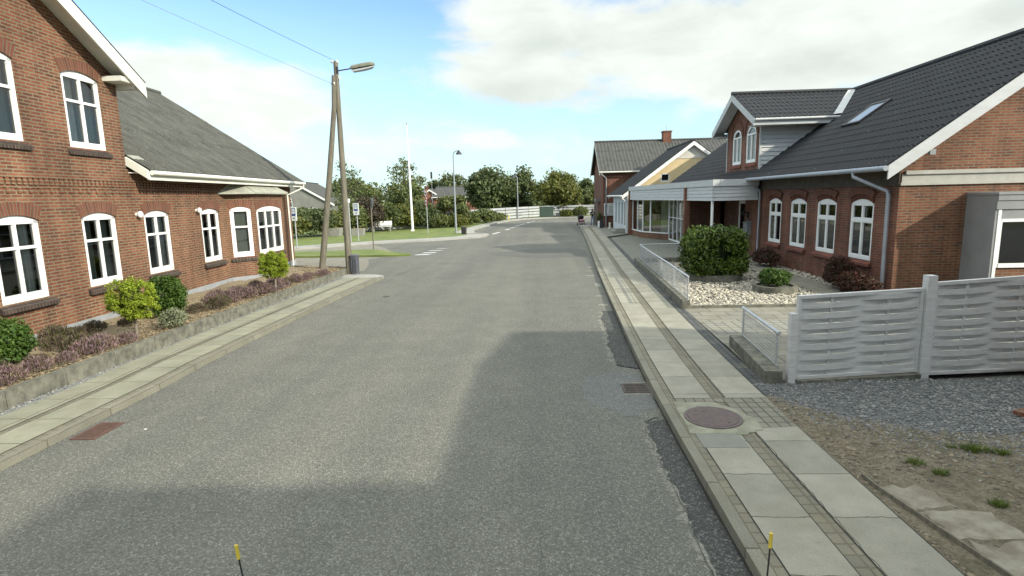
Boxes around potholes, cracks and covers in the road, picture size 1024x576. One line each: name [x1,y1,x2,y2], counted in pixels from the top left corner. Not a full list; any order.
drain grate [621,383,651,393]
manhole cover [684,406,743,429]
drain grate [69,422,125,440]
